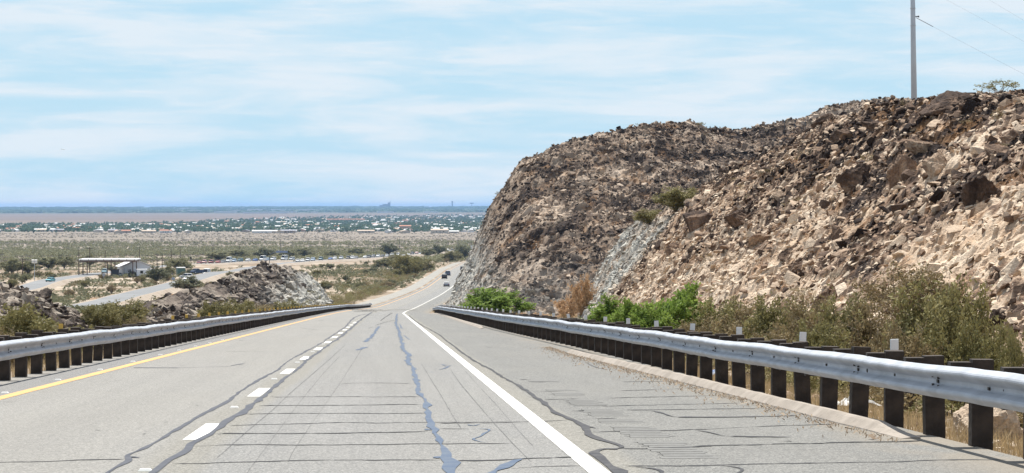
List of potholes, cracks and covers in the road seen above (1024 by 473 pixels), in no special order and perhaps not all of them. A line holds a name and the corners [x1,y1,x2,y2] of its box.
crack [580,381,1005,466]
crack [172,344,577,471]
